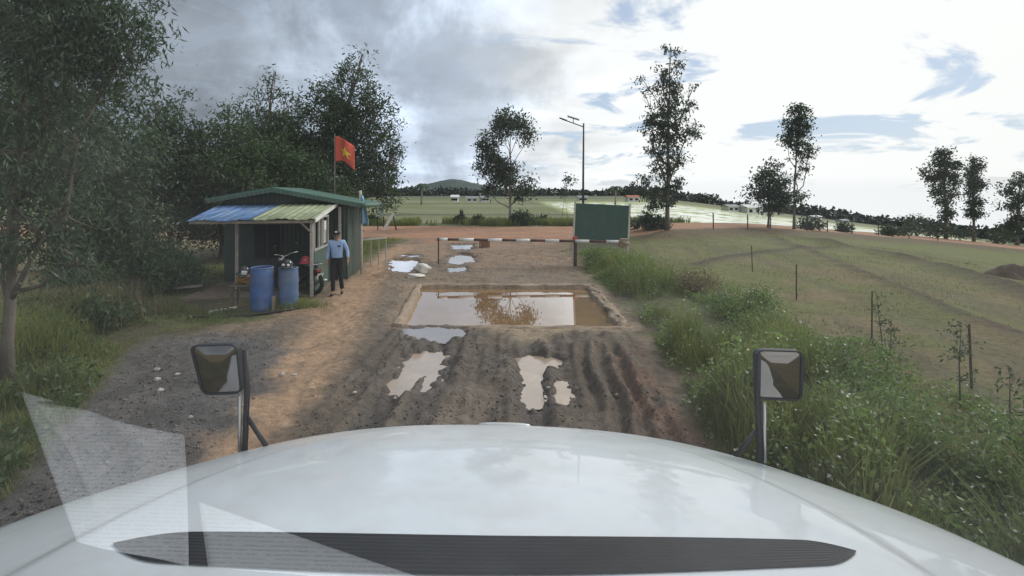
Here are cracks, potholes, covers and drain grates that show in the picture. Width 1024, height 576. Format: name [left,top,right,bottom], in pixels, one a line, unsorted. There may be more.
pothole [373,342,458,402]
pothole [501,344,575,415]
pothole [390,324,478,345]
pothole [386,258,425,272]
pothole [544,374,585,407]
pothole [439,252,479,265]
